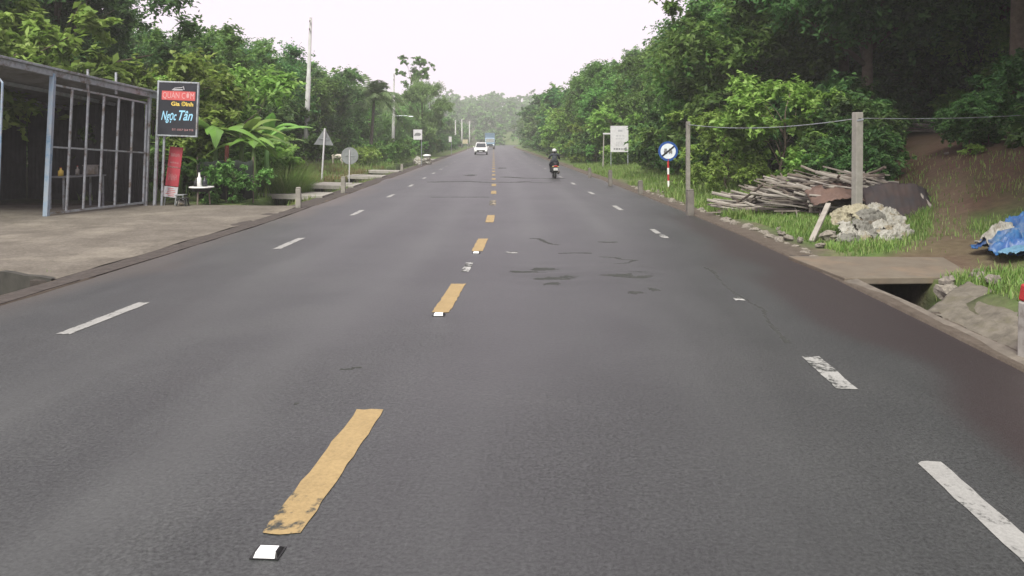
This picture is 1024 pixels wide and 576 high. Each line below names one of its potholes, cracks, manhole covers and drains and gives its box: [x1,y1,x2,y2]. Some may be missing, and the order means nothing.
crack [530,238,639,264]
crack [704,267,792,344]
